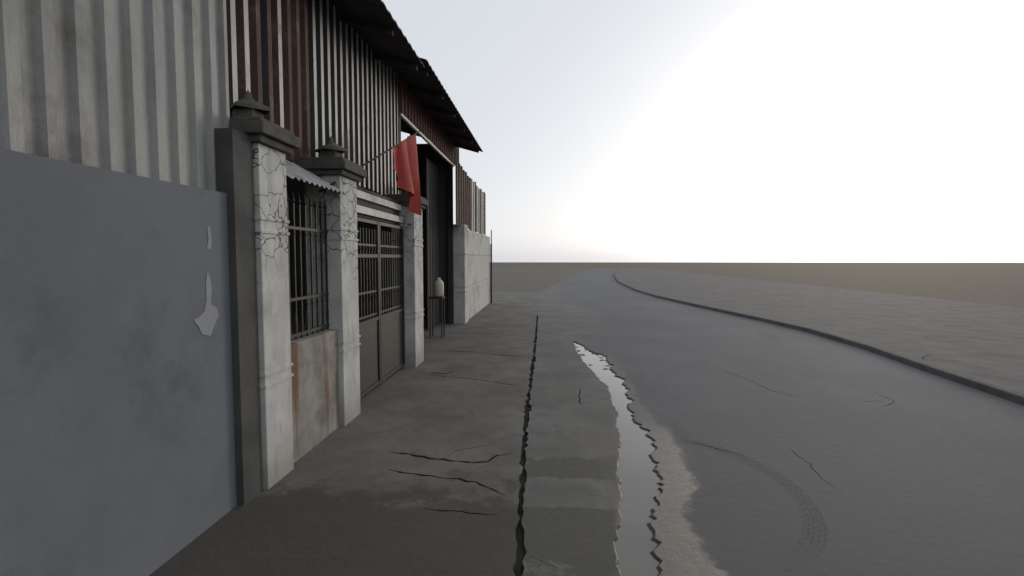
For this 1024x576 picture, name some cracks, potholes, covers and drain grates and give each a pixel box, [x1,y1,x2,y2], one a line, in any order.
pothole [572,341,664,576]
